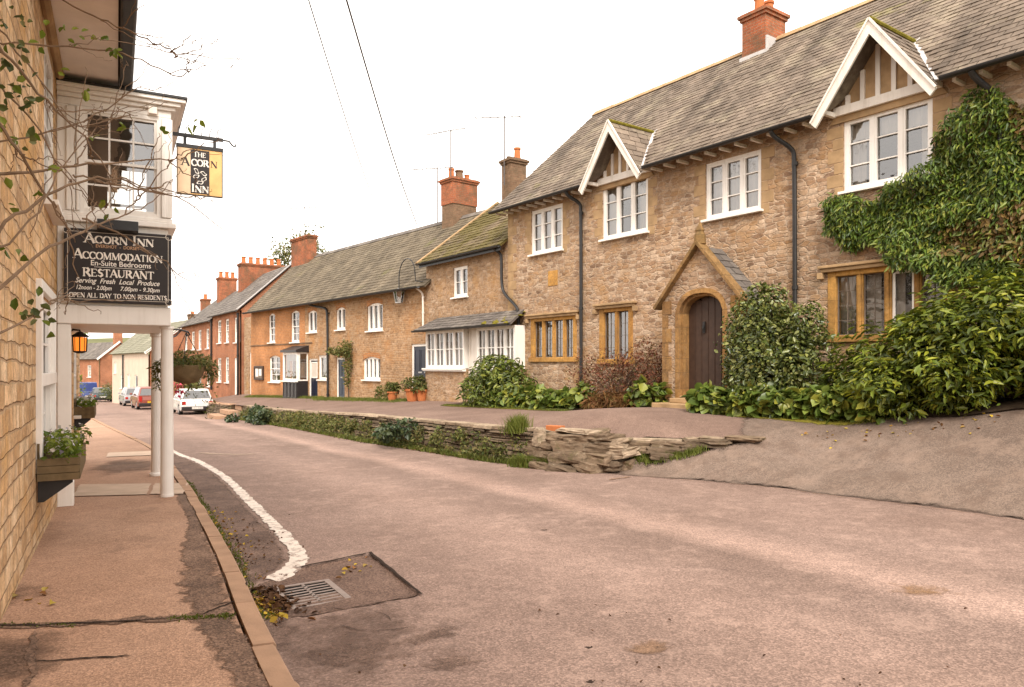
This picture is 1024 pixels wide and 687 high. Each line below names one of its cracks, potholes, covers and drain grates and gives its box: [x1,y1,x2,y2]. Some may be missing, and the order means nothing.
crack [0,582,247,628]
drain grate [274,579,351,609]
